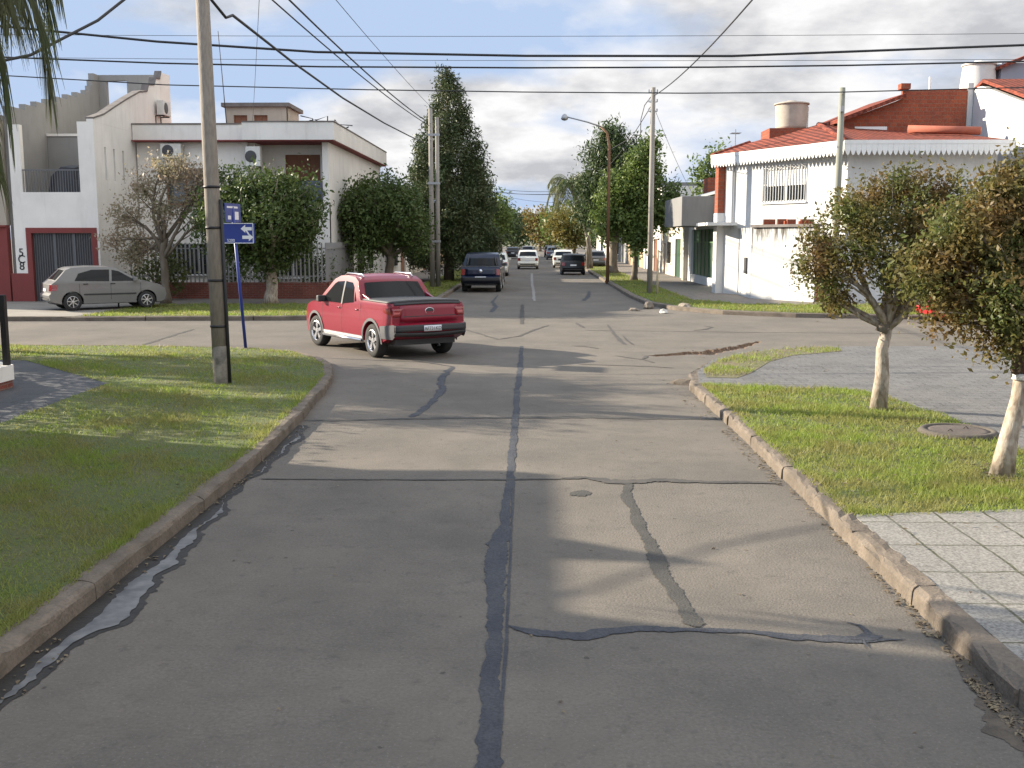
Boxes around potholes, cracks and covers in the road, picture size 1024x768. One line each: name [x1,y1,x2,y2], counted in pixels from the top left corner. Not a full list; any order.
manhole cover [918,423,999,441]
